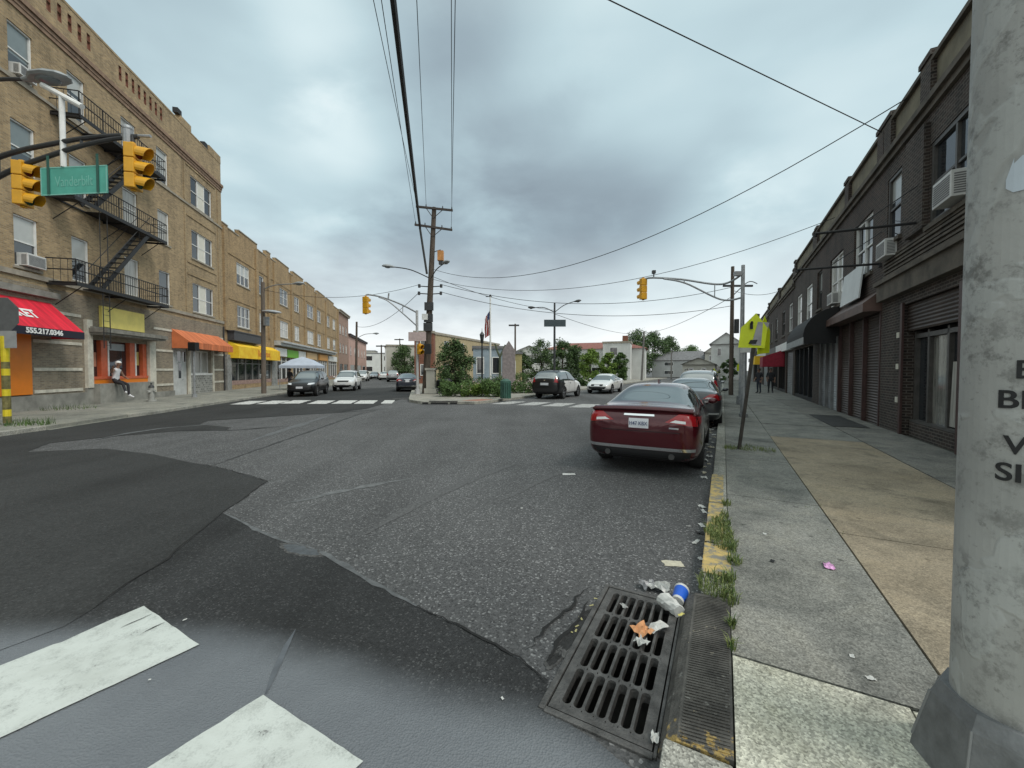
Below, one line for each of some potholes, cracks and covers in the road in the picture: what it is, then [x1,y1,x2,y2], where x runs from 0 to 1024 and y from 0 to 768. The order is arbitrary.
drain grate [538,584,734,768]
crack [417,588,588,682]
